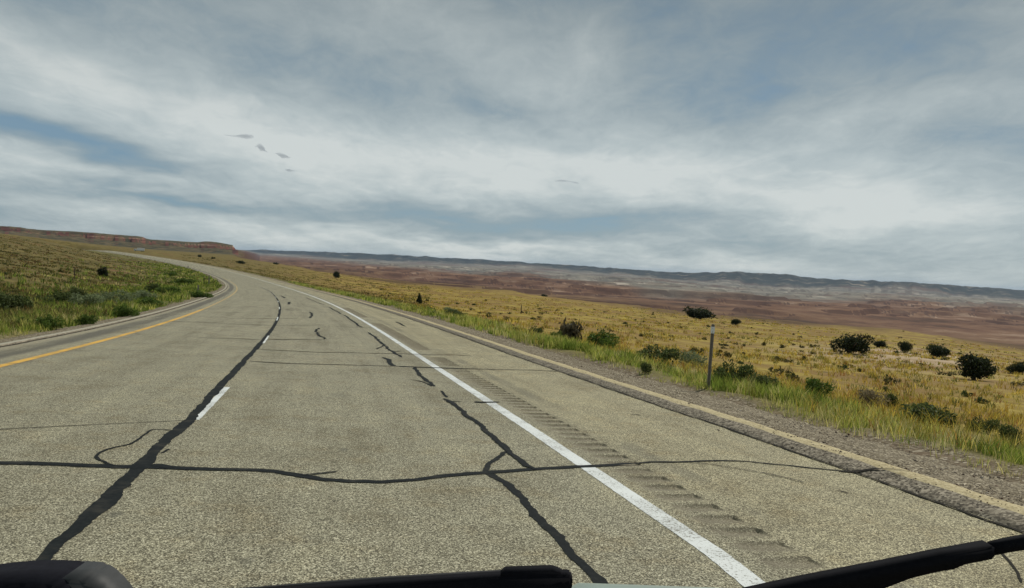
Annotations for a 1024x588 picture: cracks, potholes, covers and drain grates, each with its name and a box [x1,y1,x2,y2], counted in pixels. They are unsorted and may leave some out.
crack [178,296,548,371]
crack [6,420,184,429]
